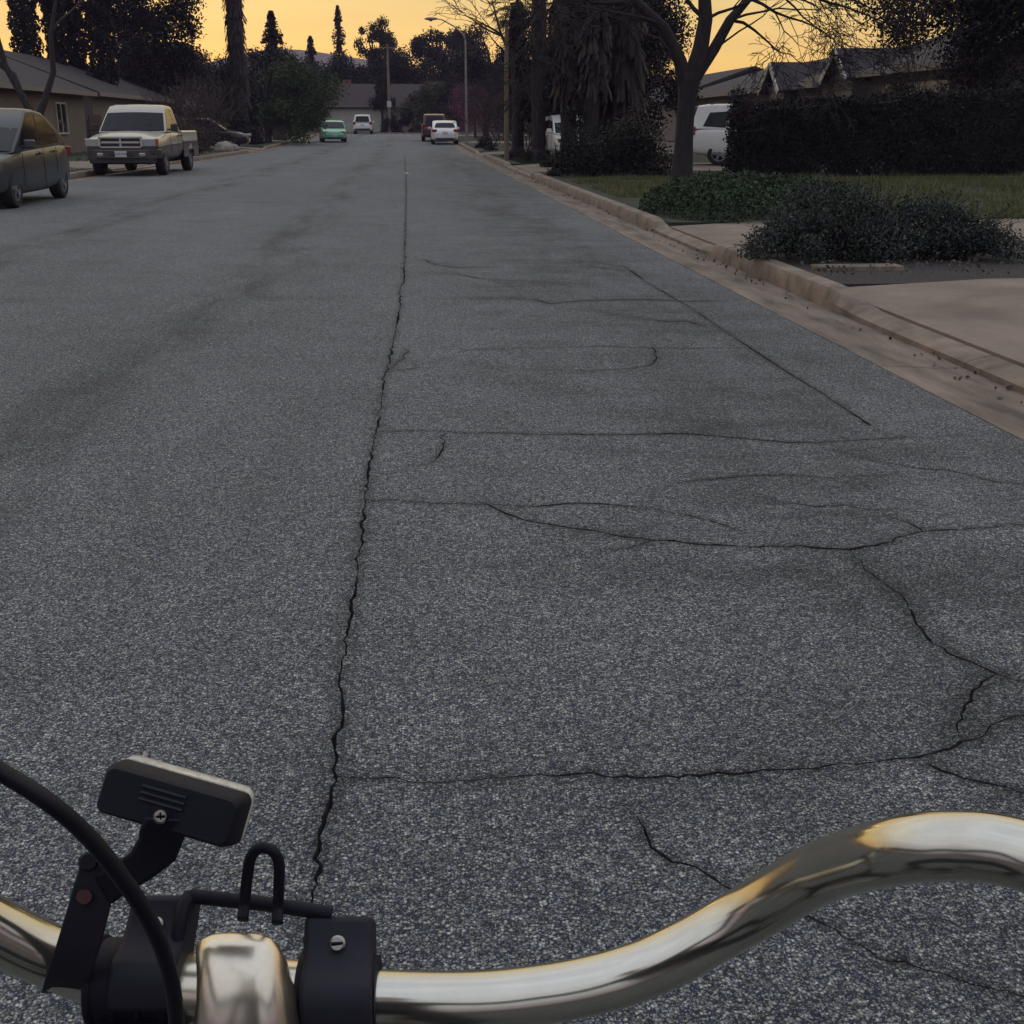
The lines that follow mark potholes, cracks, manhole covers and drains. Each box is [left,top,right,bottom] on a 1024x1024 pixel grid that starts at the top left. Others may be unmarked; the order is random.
crack [302,162,1024,955]
crack [627,808,1024,997]
